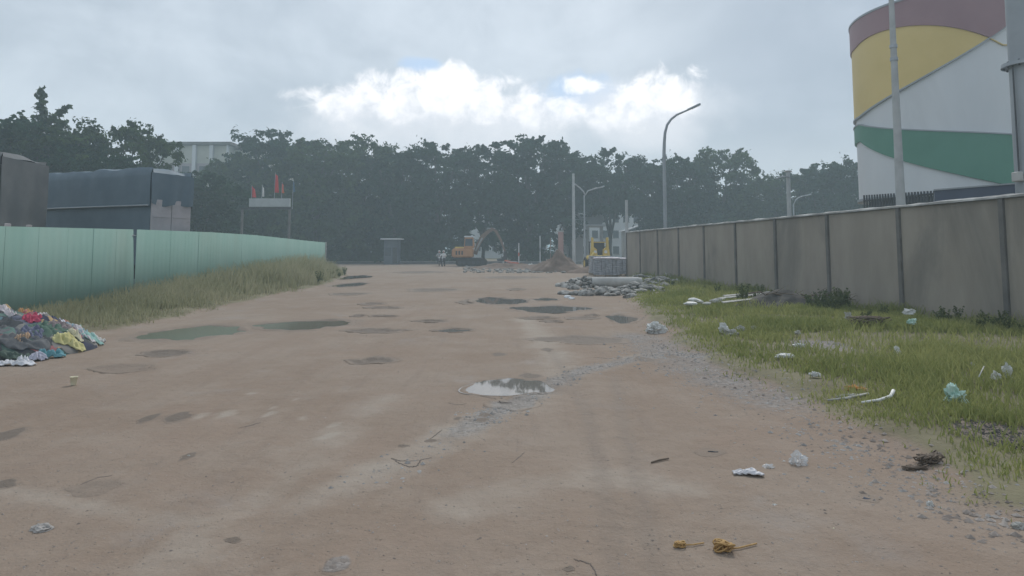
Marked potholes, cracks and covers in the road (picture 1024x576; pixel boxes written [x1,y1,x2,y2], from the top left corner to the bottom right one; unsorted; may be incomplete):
crack [391,458,430,467]
pothole [457,378,559,397]
pothole [135,349,195,357]
pothole [0,427,29,441]
pothole [87,364,153,374]
pothole [343,356,400,365]
